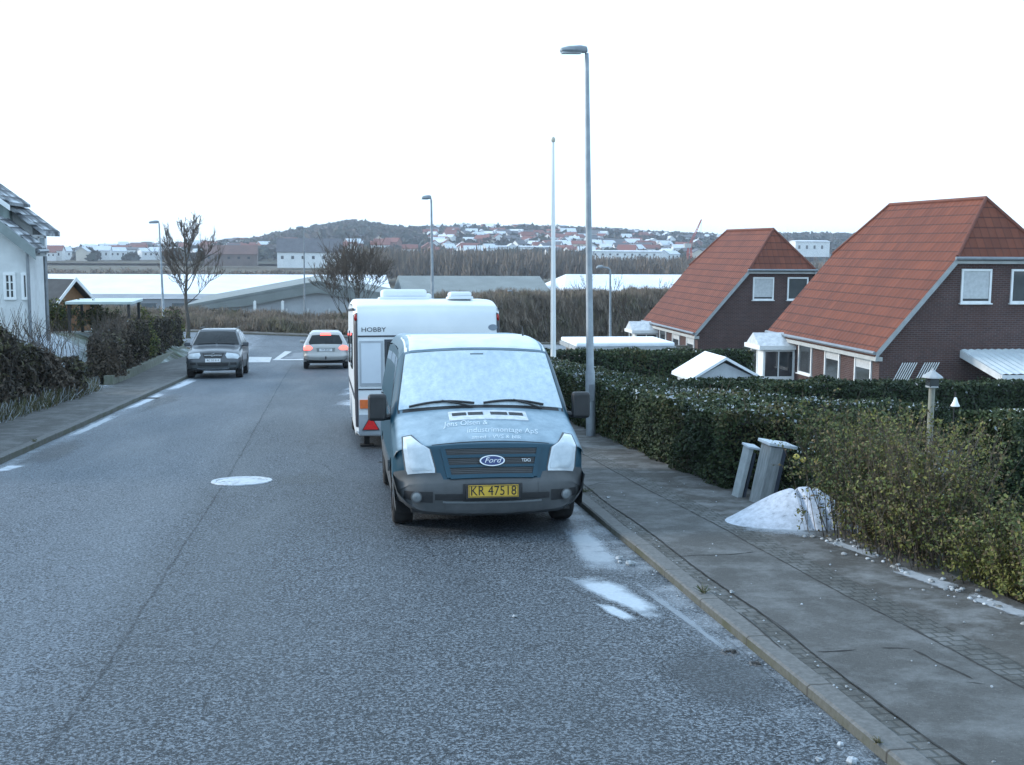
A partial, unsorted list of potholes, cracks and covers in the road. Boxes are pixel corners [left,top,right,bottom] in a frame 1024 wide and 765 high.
manhole cover [211,476,272,486]
crack [915,650,984,684]
